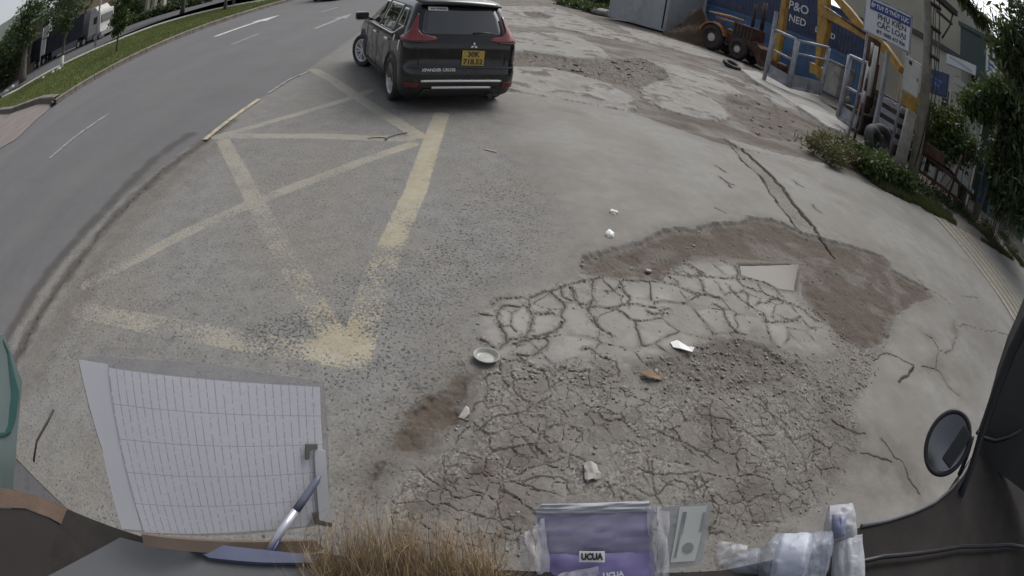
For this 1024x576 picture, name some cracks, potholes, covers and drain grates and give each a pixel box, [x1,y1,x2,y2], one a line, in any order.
crack [872,272,1008,396]
pothole [513,53,669,87]
pothole [578,215,933,352]
crack [387,260,920,554]
pothole [643,338,804,394]
pothole [724,92,832,143]
